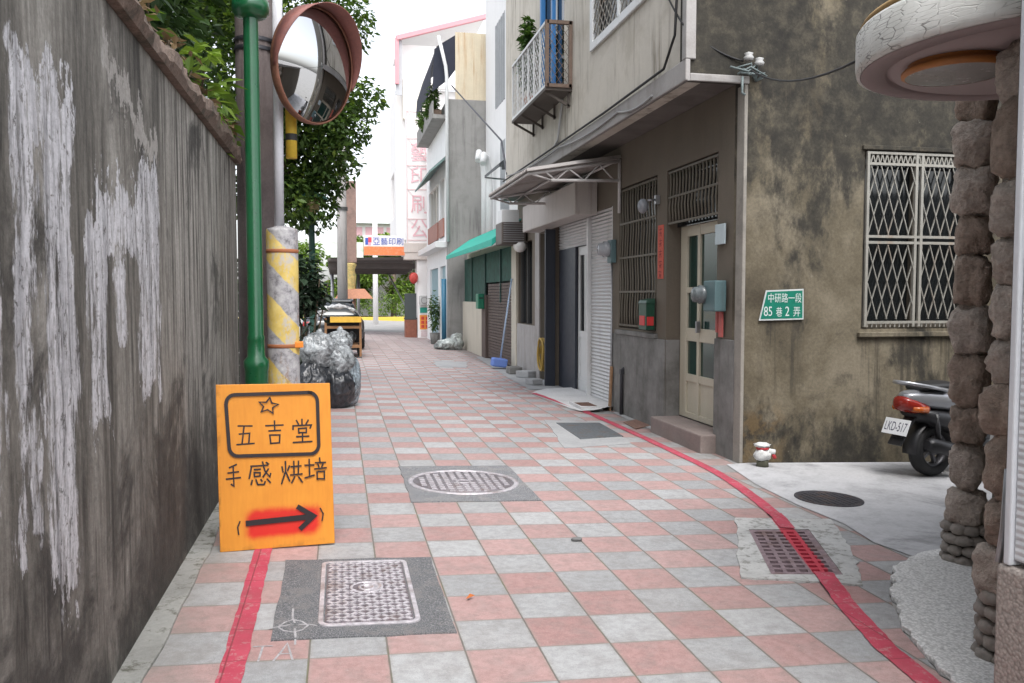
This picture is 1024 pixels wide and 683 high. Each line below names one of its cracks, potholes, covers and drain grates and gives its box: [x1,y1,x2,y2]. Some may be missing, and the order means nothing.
manhole cover [398,465,541,503]
drain grate [734,518,863,586]
manhole cover [271,557,457,641]
manhole cover [544,420,631,448]
manhole cover [794,490,864,507]
